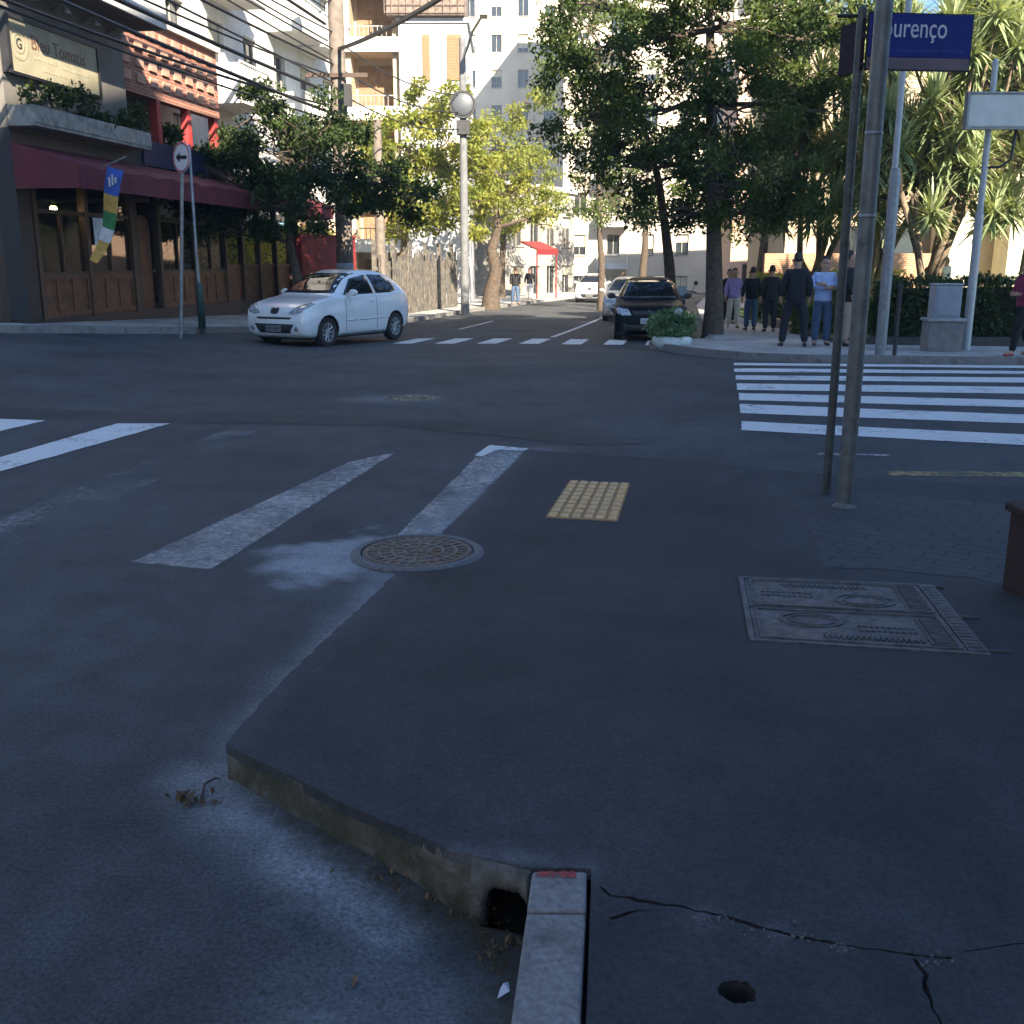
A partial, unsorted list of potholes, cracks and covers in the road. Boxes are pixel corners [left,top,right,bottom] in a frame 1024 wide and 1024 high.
pothole [717,981,756,1004]
manhole cover [383,394,441,402]
manhole cover [738,576,1012,656]
crack [602,887,1024,1024]
manhole cover [350,533,484,573]
drain grate [469,858,531,937]
